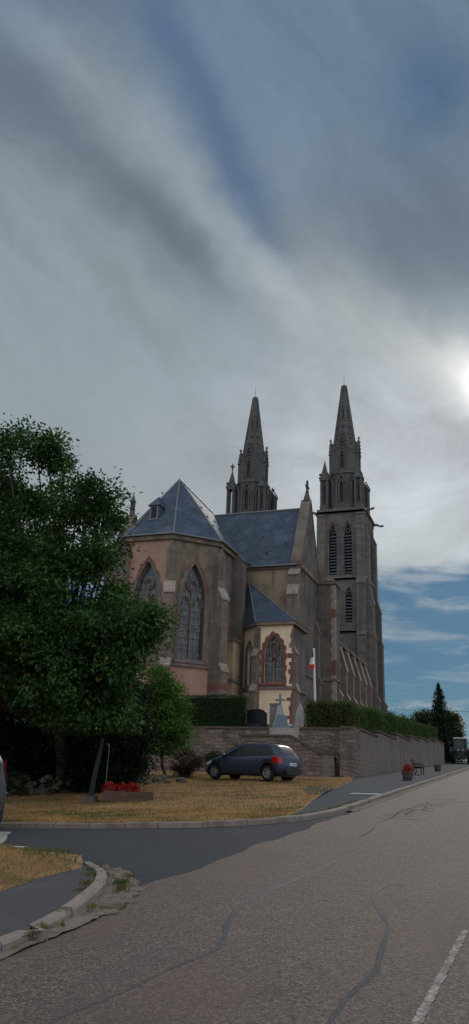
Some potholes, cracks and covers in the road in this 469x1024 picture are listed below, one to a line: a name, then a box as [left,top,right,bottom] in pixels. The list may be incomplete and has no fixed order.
crack [359,801,469,837]
